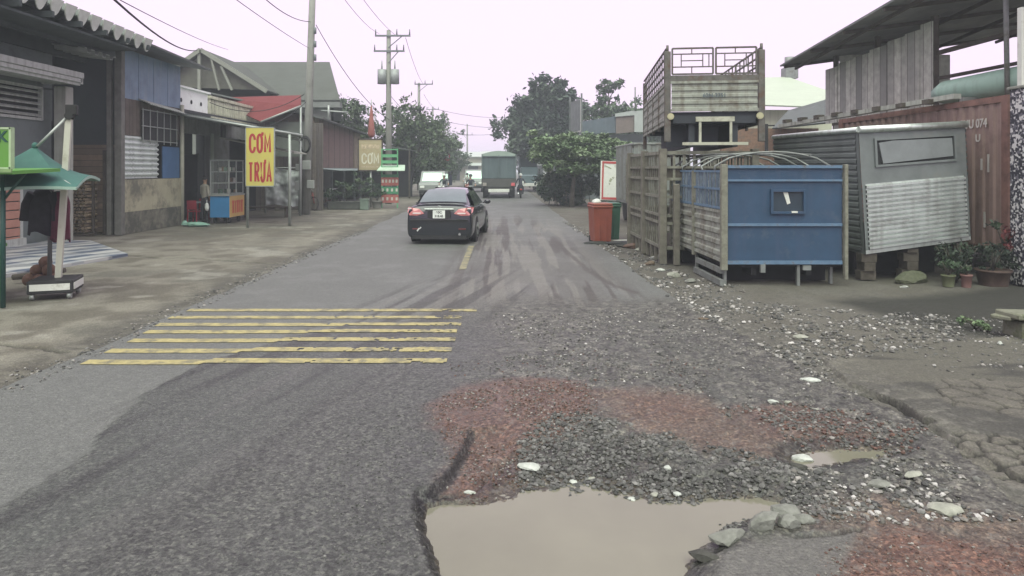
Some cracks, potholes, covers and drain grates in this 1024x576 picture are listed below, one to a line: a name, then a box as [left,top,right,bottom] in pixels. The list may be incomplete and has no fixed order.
crack [858,378,1024,484]
pothole [410,423,824,576]
